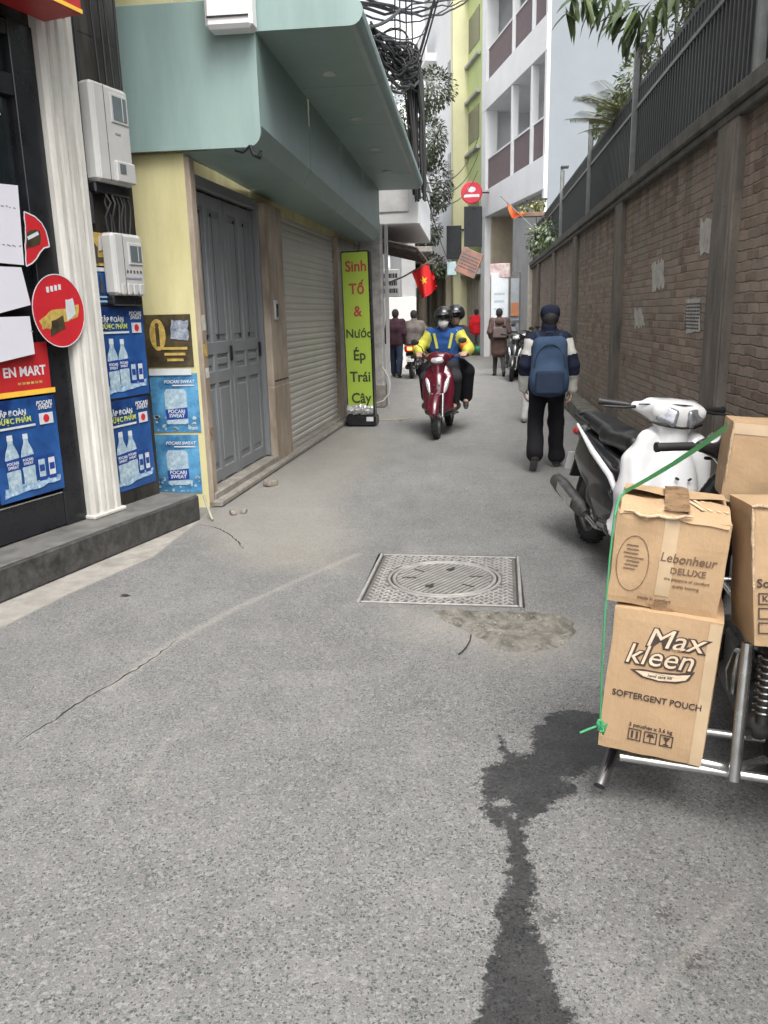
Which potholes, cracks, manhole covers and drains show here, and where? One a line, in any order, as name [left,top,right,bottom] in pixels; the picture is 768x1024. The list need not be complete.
manhole cover [356,553,523,608]
crack [19,639,178,742]
